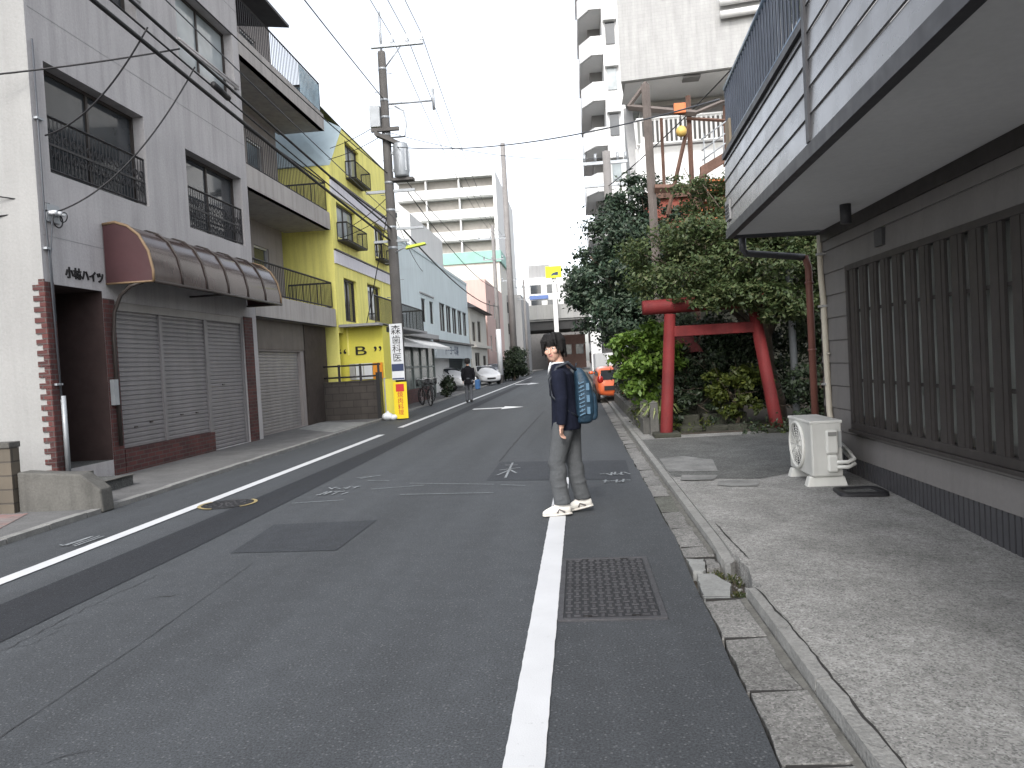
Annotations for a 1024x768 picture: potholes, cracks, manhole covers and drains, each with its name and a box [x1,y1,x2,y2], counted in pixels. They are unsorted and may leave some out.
manhole cover [197,499,258,509]
crack [716,524,747,556]
crack [0,572,177,651]
manhole cover [557,556,668,622]
